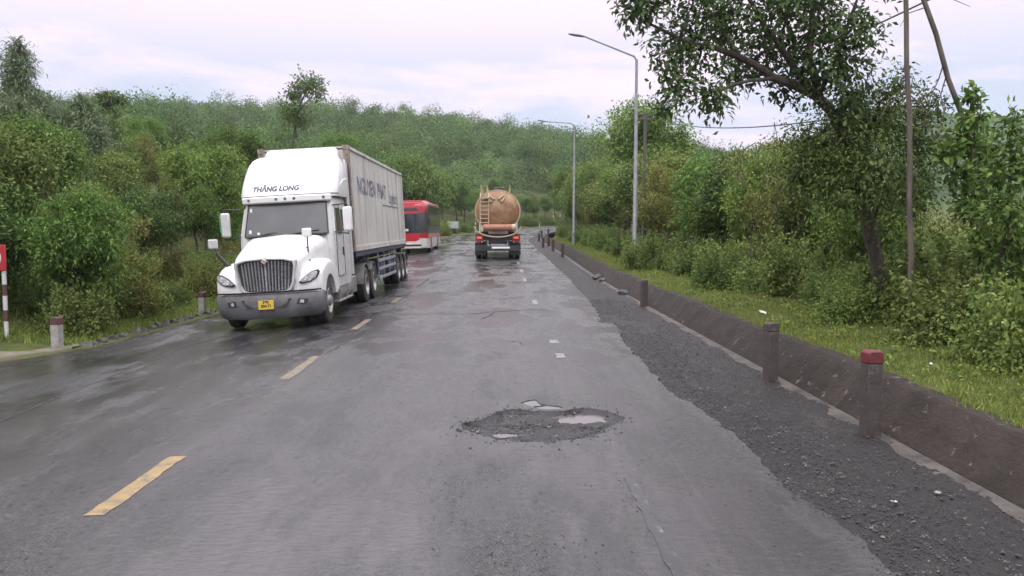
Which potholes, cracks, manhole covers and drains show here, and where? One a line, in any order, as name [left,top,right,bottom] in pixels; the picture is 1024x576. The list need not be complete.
pothole [377,403,632,449]
pothole [521,399,562,409]
